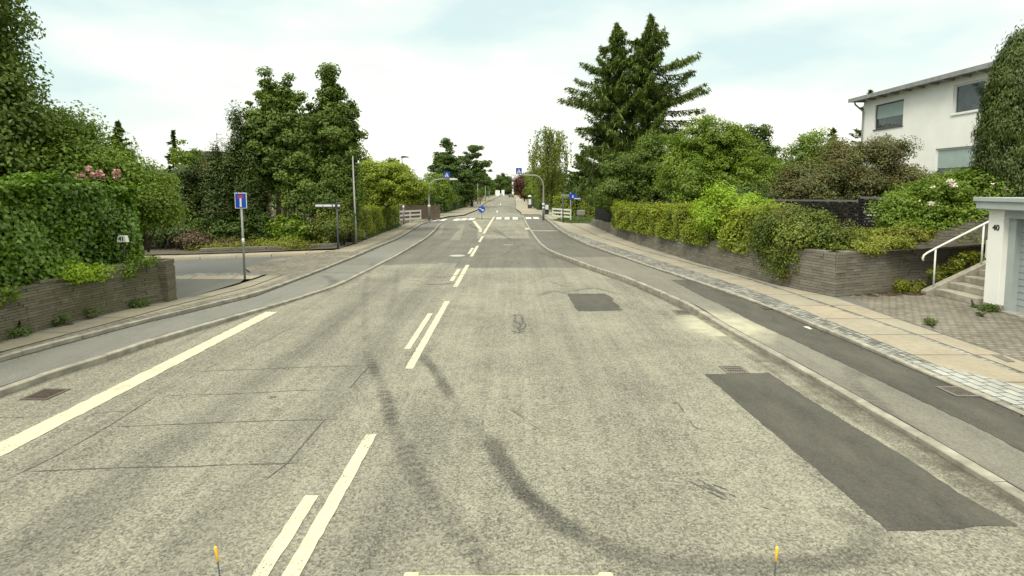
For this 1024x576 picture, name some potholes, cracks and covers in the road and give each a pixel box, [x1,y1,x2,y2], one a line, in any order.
drain grate [19,388,71,400]
crack [513,315,527,340]
drain grate [719,366,750,374]
drain grate [935,386,981,397]
